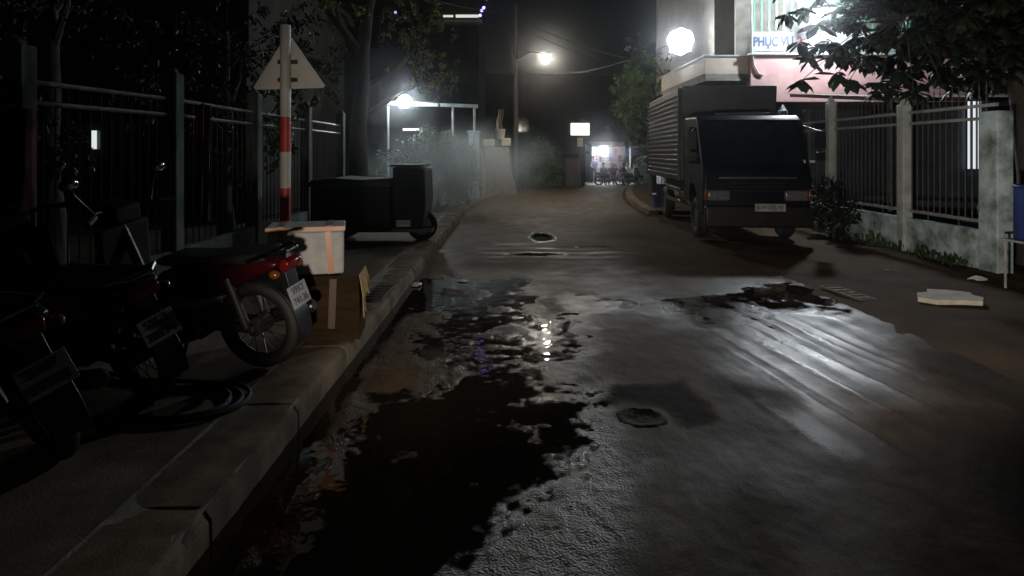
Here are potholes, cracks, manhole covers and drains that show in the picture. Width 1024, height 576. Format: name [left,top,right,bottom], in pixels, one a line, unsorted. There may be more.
pothole [616,407,668,428]
drain grate [820,285,876,301]
drain grate [366,285,394,302]
pothole [528,232,557,243]
